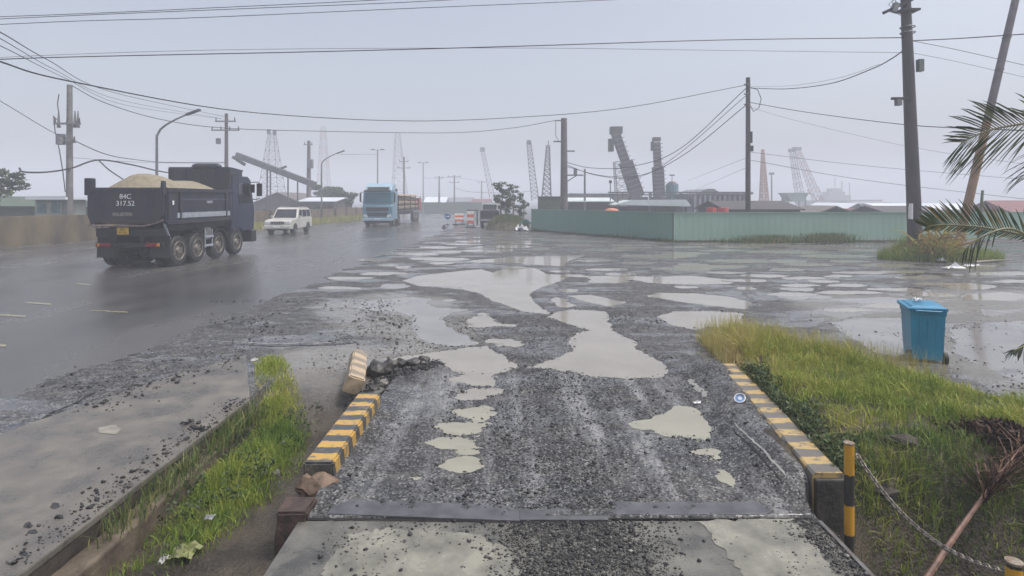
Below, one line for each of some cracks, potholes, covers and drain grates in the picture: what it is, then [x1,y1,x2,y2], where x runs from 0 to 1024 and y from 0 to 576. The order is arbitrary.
pothole [383,346,518,374]
pothole [657,311,744,330]
pothole [715,469,735,487]
pothole [402,267,566,314]
pothole [449,372,498,389]
pothole [438,451,485,473]
pothole [451,405,497,421]
pothole [628,405,711,442]
pothole [425,431,476,449]
pothole [691,448,722,460]
pothole [527,309,668,379]
pothole [435,420,492,437]
